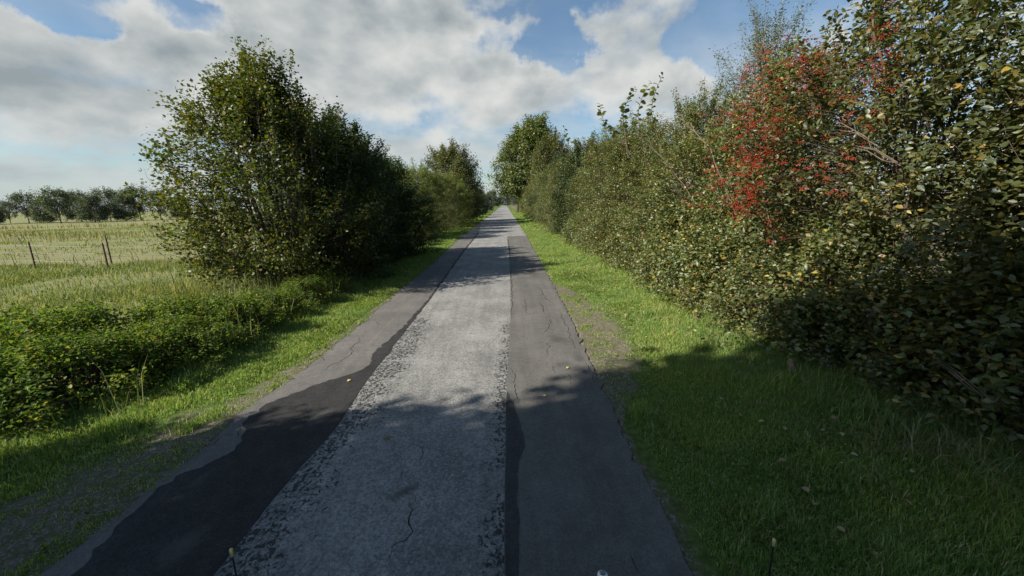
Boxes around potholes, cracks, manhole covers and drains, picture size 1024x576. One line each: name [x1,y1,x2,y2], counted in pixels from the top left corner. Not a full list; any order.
crack [387,497,416,567]
crack [524,288,595,382]
